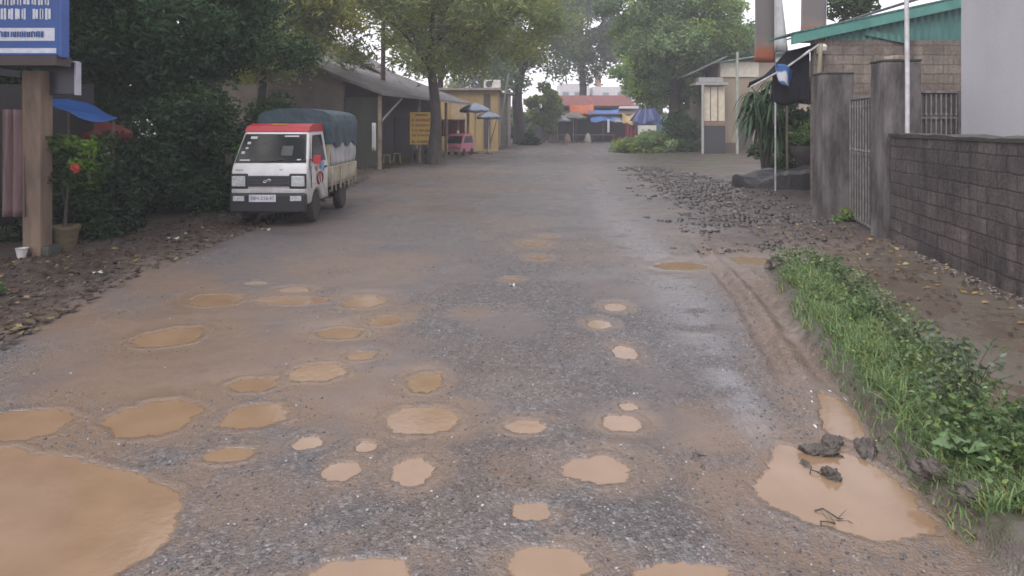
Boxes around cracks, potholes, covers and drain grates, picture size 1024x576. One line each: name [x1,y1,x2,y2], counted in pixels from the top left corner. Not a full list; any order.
pothole [0,404,92,448]
pothole [499,494,565,527]
pothole [189,442,268,468]
pothole [308,456,373,488]
pothole [738,438,959,552]
pothole [206,400,301,434]
pothole [119,324,216,350]
pothole [547,449,645,491]
pothole [178,292,253,308]
pothole [592,410,653,436]
pothole [0,440,202,576]
pothole [215,374,292,396]
